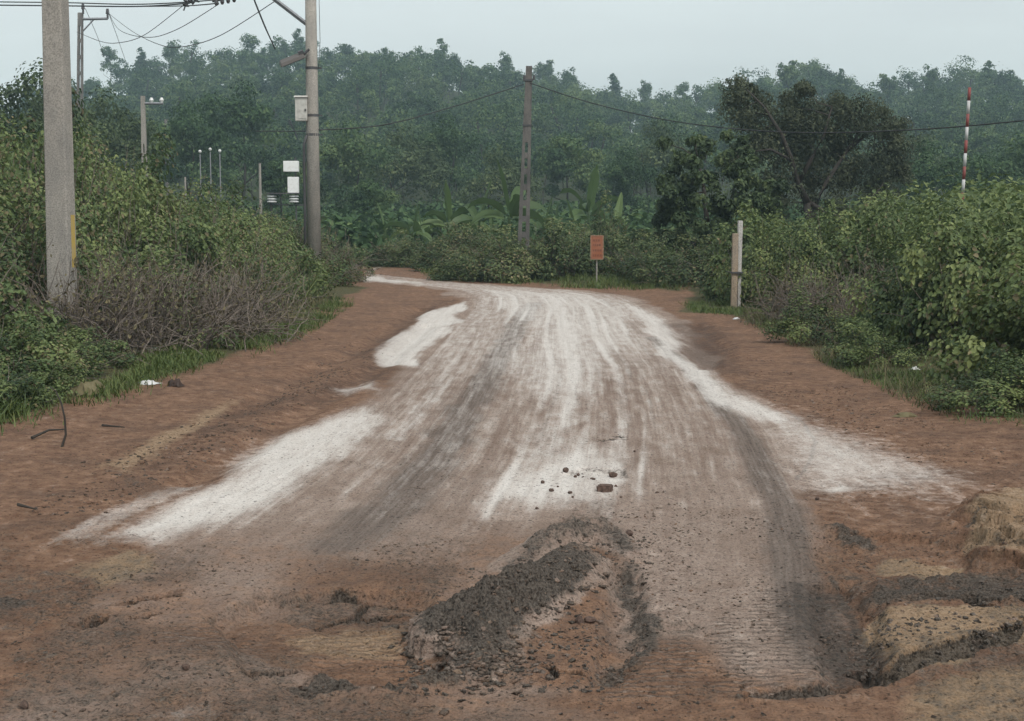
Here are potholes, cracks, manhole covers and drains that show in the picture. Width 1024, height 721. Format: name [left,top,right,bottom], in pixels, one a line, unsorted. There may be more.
pothole [800,580,895,659]
pothole [586,561,651,688]
